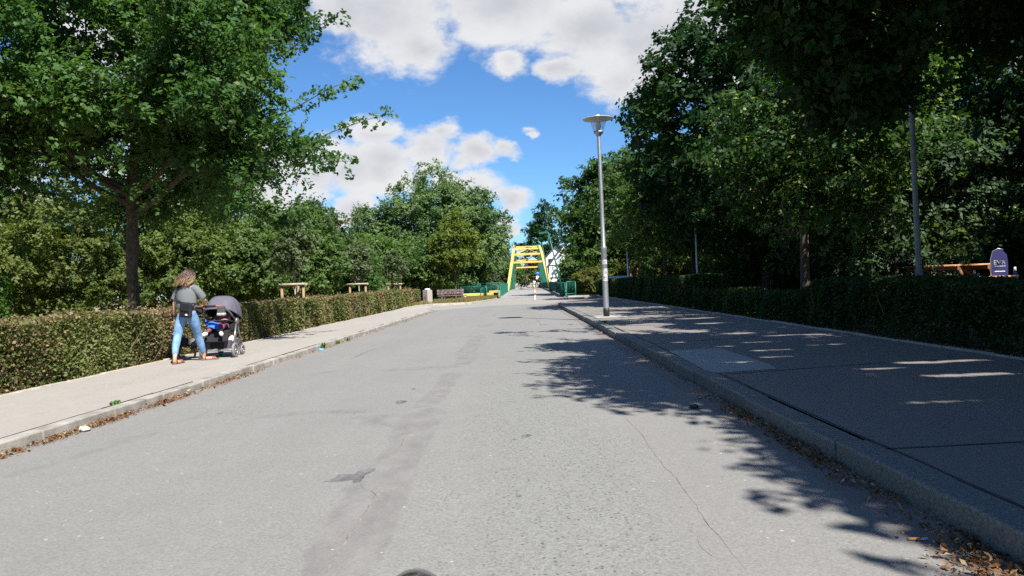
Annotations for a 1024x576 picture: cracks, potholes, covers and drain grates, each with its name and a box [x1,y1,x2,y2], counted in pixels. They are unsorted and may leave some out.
crack [627,420,749,575]
